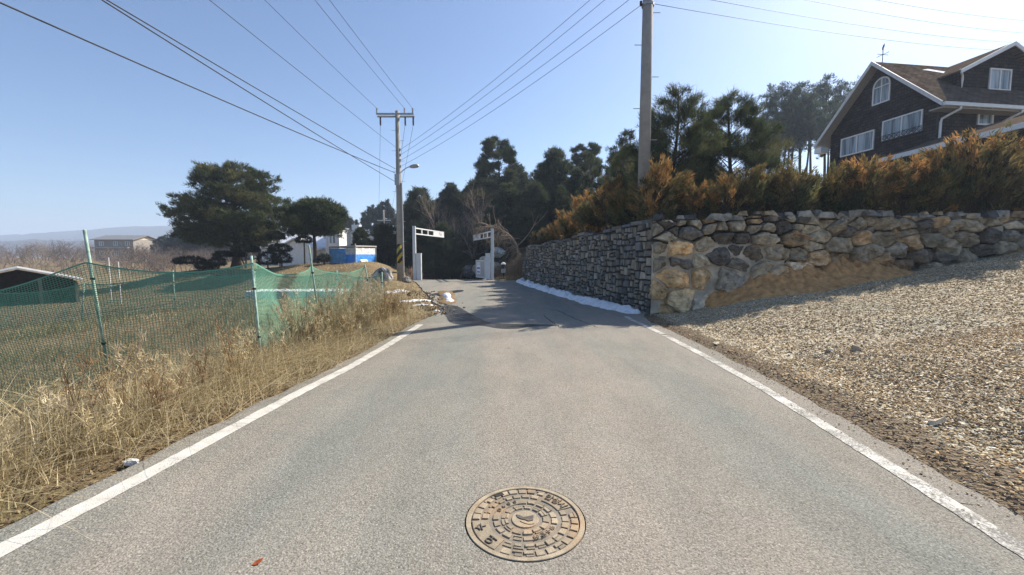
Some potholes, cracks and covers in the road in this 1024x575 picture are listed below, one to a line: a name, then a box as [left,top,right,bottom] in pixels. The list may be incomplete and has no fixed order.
manhole cover [466,486,585,563]
